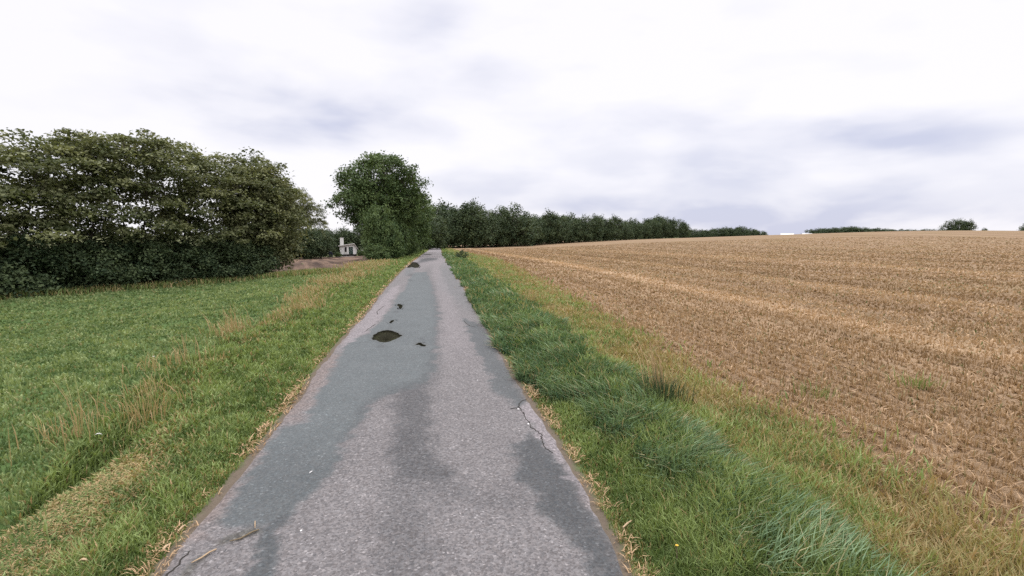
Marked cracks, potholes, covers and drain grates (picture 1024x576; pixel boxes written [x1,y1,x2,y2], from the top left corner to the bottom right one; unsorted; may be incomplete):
pothole [367,329,407,344]
crack [511,399,553,453]
crack [165,550,191,576]
